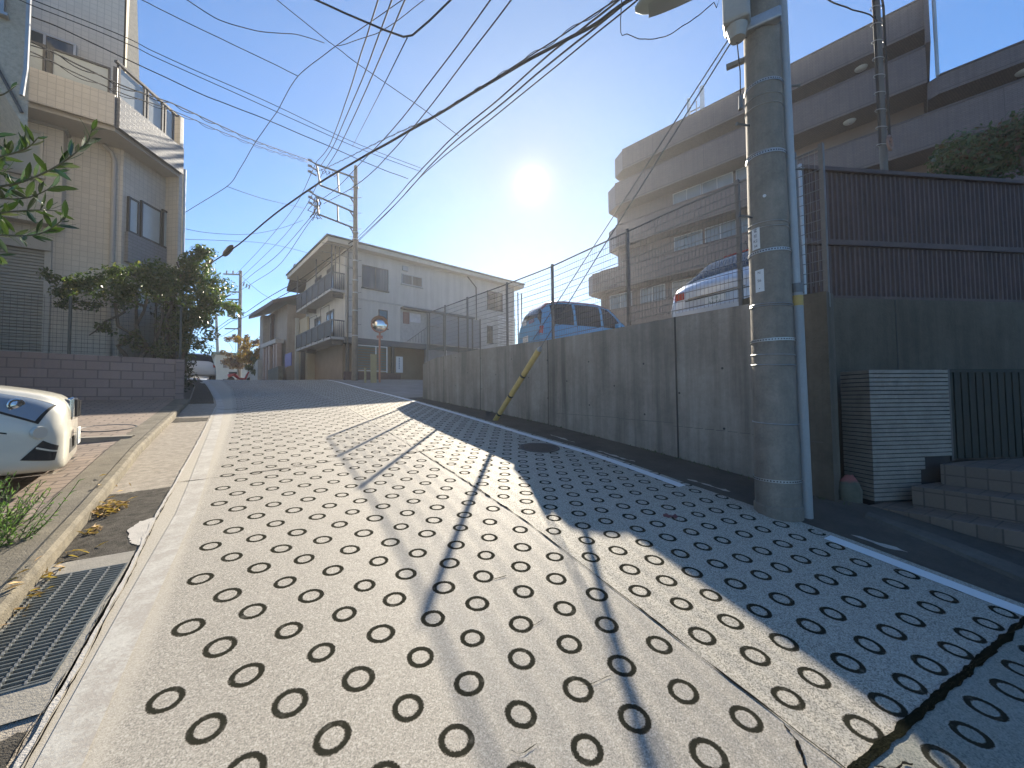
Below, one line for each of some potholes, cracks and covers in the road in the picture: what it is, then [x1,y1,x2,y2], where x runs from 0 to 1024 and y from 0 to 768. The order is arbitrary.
drain grate [0,551,135,725]
manhole cover [519,443,560,453]
crack [784,724,808,768]
